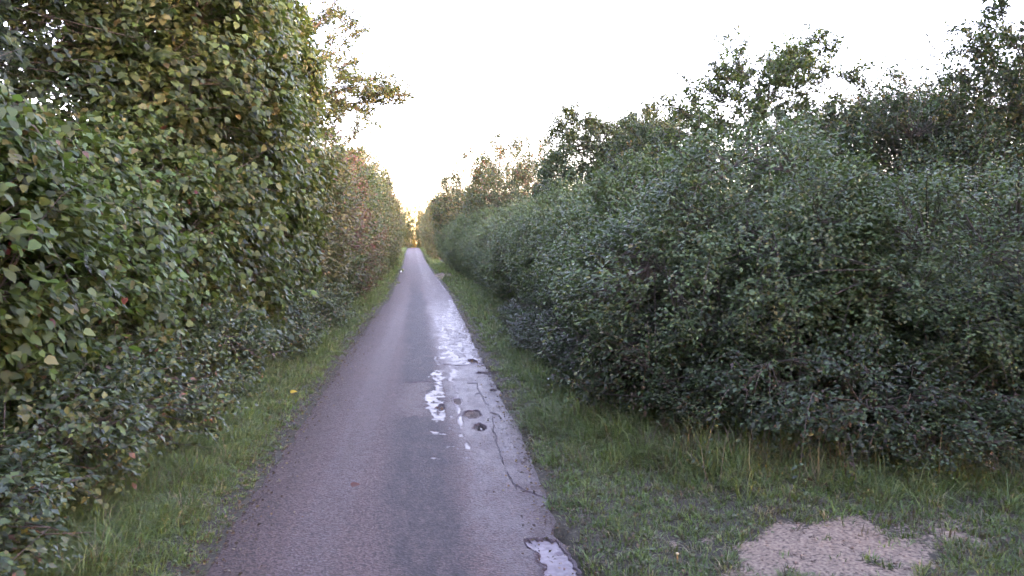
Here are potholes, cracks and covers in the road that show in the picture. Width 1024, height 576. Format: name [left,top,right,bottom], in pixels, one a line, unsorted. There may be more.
crack [467,383,550,501]
pothole [462,409,483,419]
pothole [523,535,582,576]
